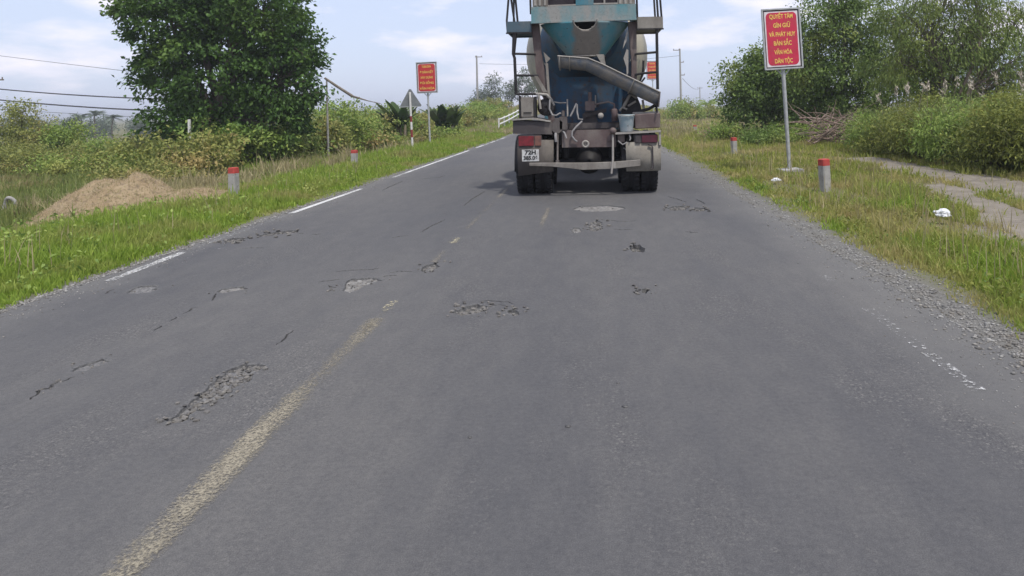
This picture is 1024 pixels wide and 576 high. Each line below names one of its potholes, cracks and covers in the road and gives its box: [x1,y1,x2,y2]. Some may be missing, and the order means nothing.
pothole [496,305,529,317]
pothole [584,219,611,232]
pothole [623,241,648,253]
pothole [156,361,269,425]
pothole [447,301,494,317]
pothole [417,260,451,273]
pothole [114,285,174,294]
pothole [208,286,249,294]
crack [29,377,73,400]
pothole [327,277,391,293]
